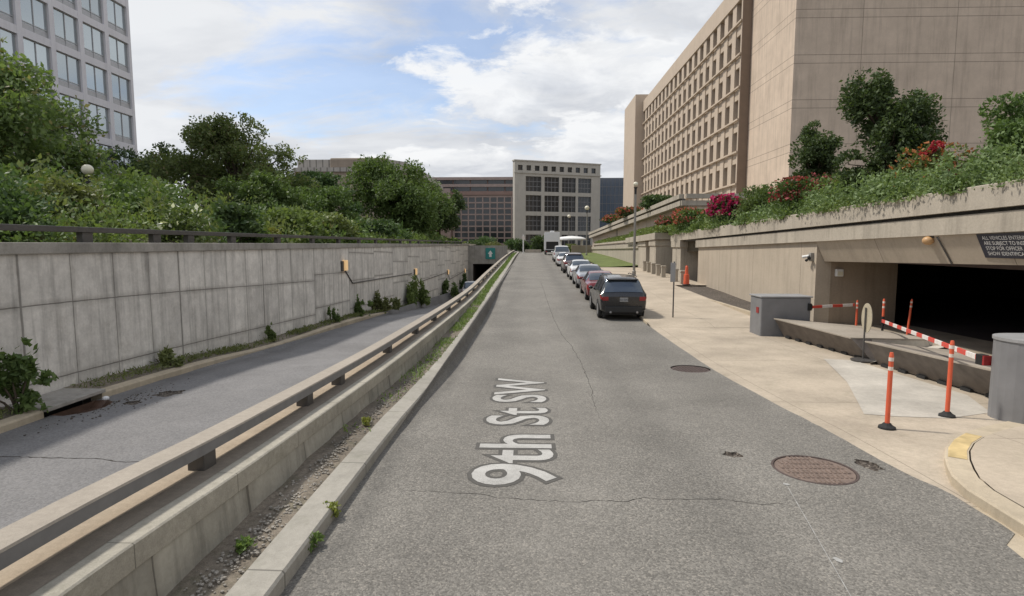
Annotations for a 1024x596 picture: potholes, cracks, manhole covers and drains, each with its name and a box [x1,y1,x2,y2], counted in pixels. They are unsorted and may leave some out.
manhole cover [771,455,860,485]
crack [405,490,809,506]
pothole [854,459,885,471]
